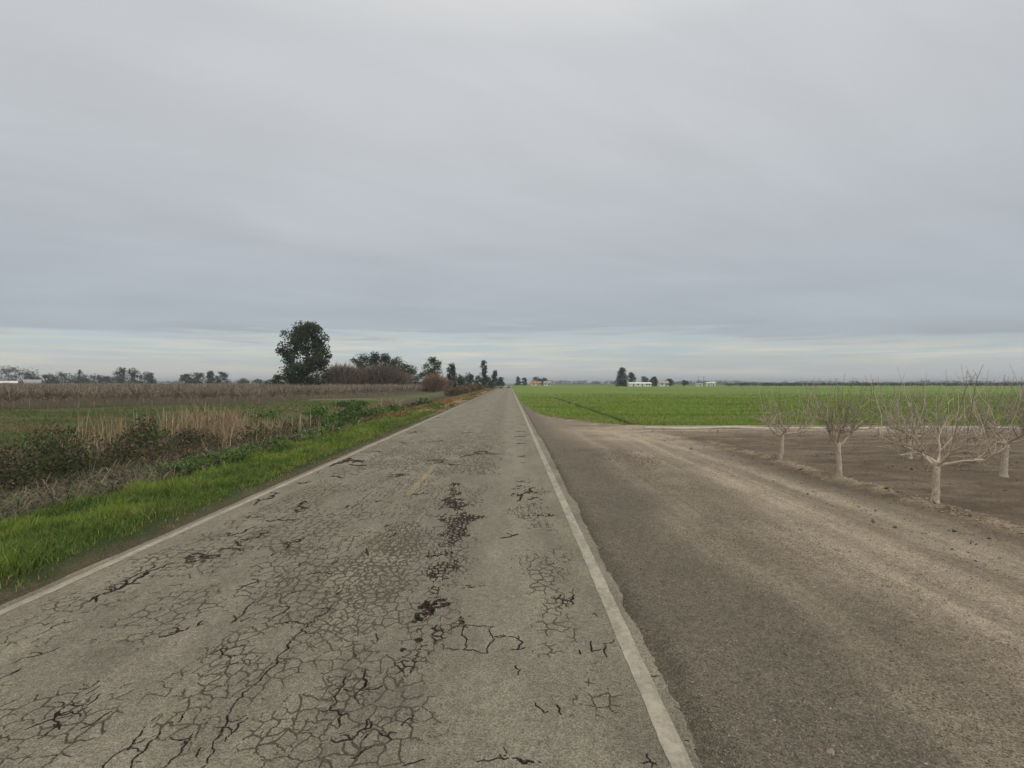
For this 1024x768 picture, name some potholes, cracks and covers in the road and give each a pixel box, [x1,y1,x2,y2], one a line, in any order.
crack [0,424,634,768]
pothole [414,598,451,623]
